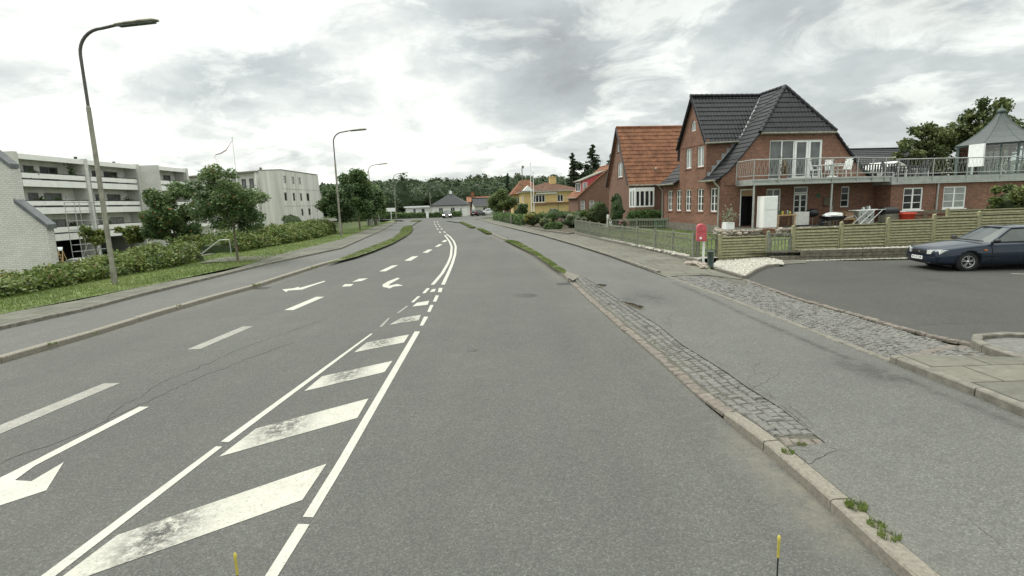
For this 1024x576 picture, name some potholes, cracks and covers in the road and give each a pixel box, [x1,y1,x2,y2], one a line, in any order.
crack [739,364,813,426]
pothole [617,300,646,311]
